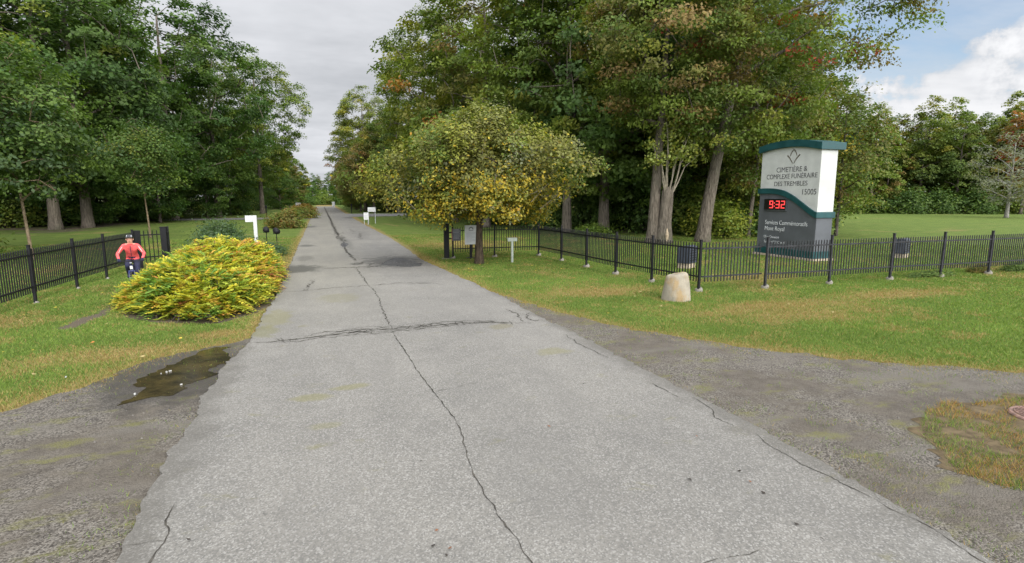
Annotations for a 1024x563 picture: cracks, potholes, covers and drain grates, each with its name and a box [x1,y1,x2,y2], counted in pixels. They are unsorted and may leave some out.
crack [241,208,538,563]
crack [757,434,986,563]
manhole cover [1007,406,1024,420]
crack [130,505,174,563]
